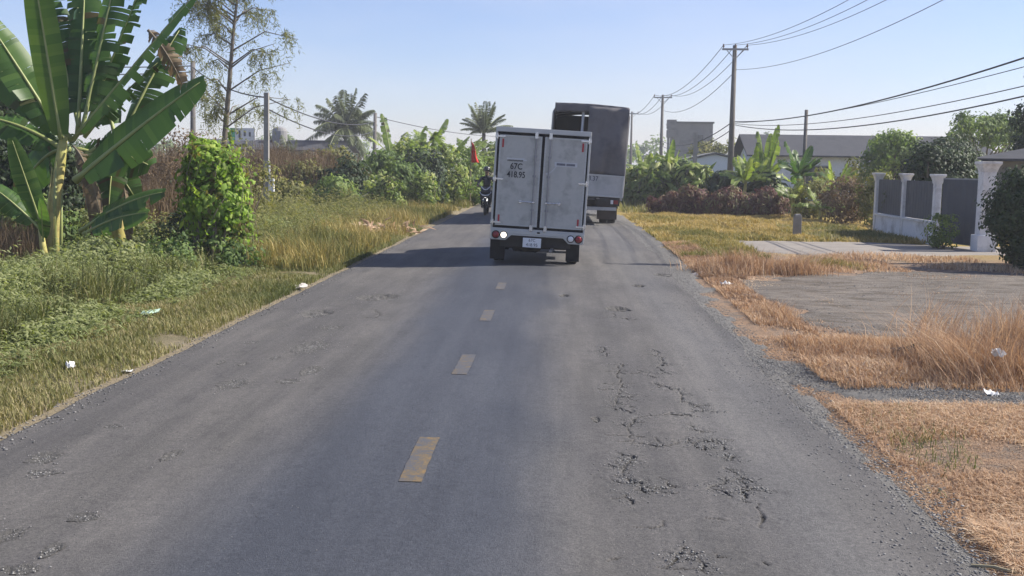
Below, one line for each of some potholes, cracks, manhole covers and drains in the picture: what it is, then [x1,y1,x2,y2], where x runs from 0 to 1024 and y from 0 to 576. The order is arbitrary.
crack [652,540,727,576]
pothole [26,469,65,478]
pothole [342,291,430,303]
pothole [204,374,250,394]
pothole [9,446,68,464]
pothole [151,442,187,468]
pothole [67,511,106,522]
pothole [24,541,65,562]
crack [588,345,778,524]
